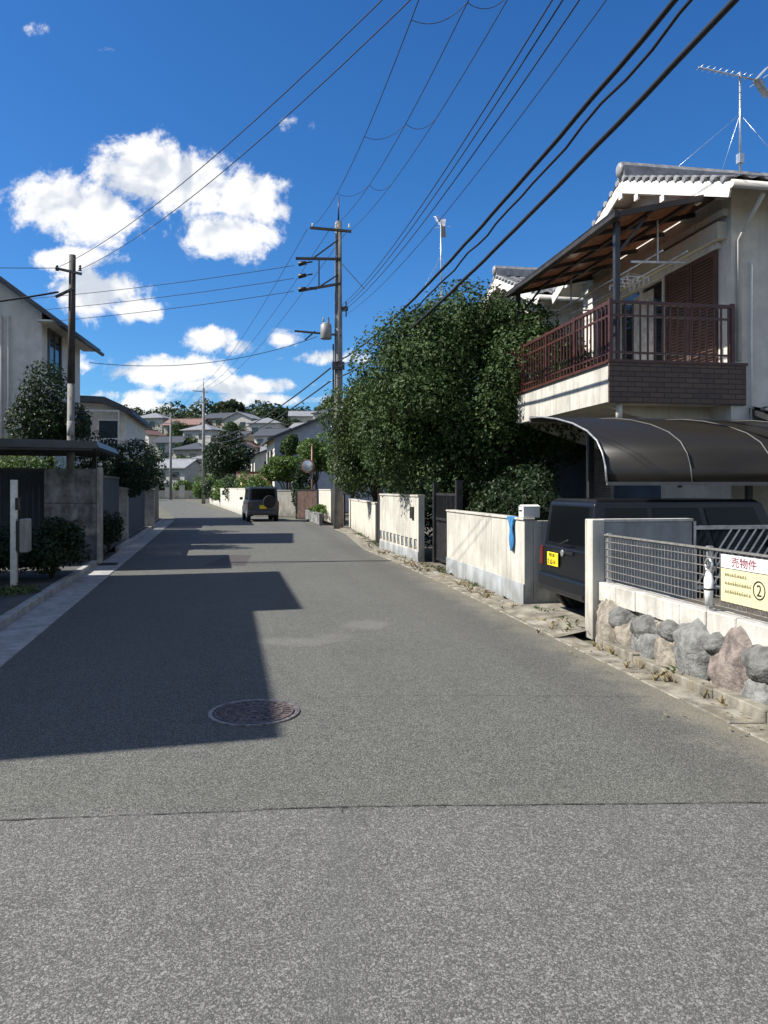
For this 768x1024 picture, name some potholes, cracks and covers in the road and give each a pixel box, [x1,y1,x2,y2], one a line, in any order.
manhole cover [208,699,300,727]
